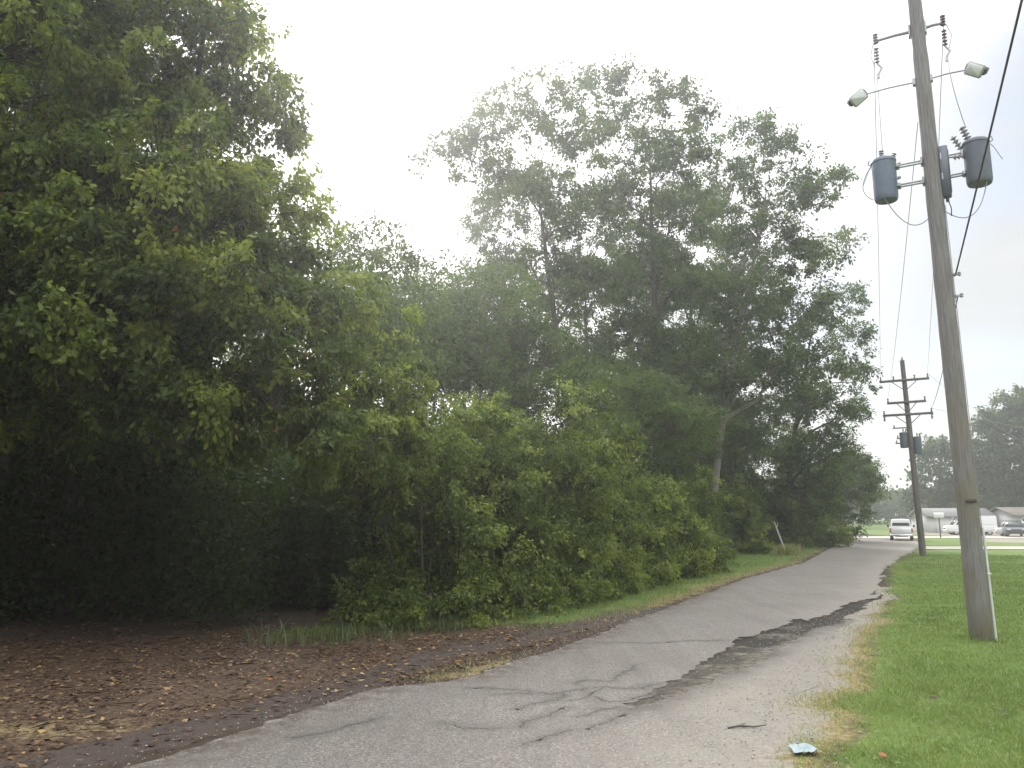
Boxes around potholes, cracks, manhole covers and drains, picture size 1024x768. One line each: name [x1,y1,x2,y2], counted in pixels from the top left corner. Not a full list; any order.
crack [443,665,659,745]
pothole [622,594,883,711]
crack [294,718,380,738]
